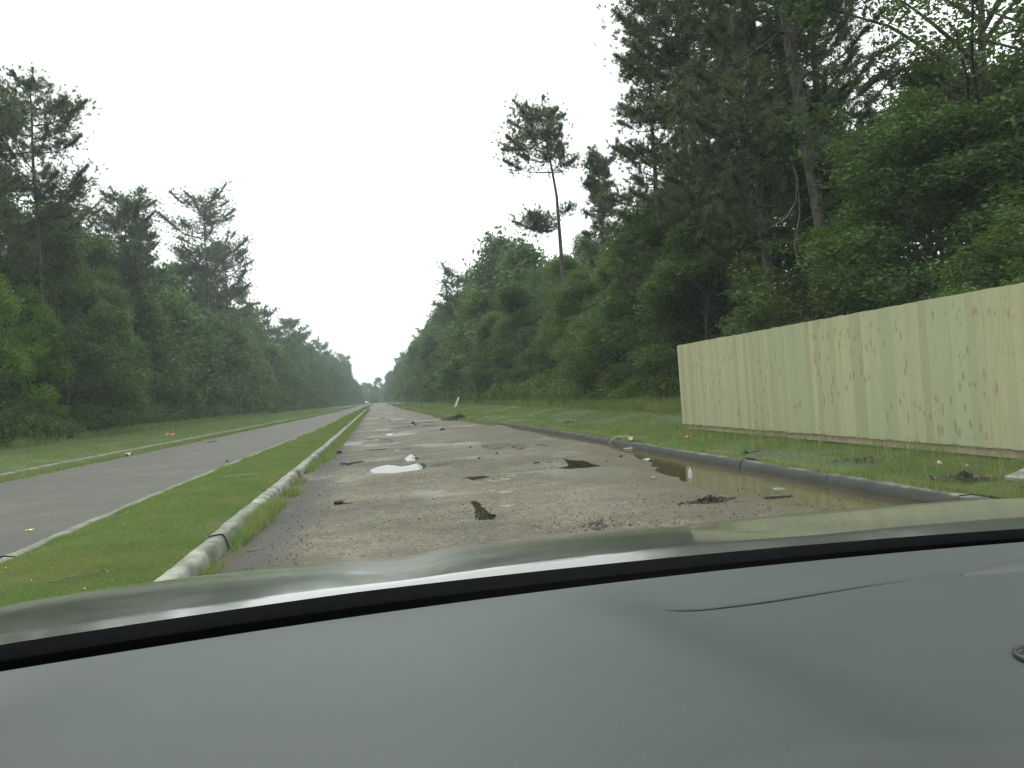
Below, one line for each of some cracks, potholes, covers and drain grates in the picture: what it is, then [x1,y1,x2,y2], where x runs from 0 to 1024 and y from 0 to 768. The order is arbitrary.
pothole [470,500,497,520]
pothole [560,458,602,469]
